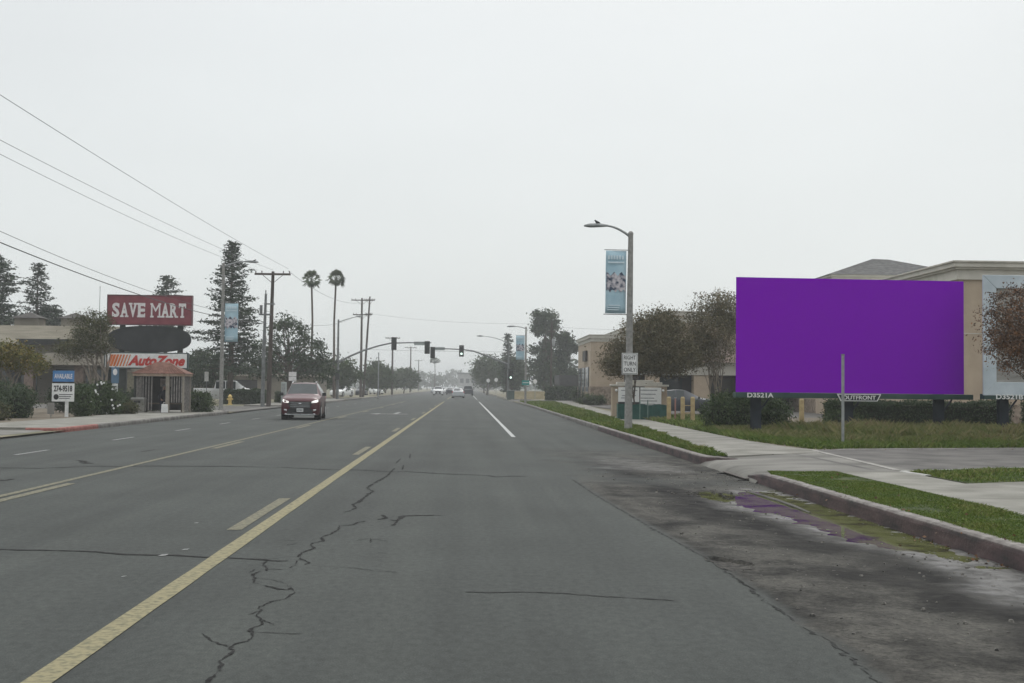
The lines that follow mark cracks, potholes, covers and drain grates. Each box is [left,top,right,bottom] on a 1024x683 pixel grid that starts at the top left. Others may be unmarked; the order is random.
crack [4,454,506,683]
